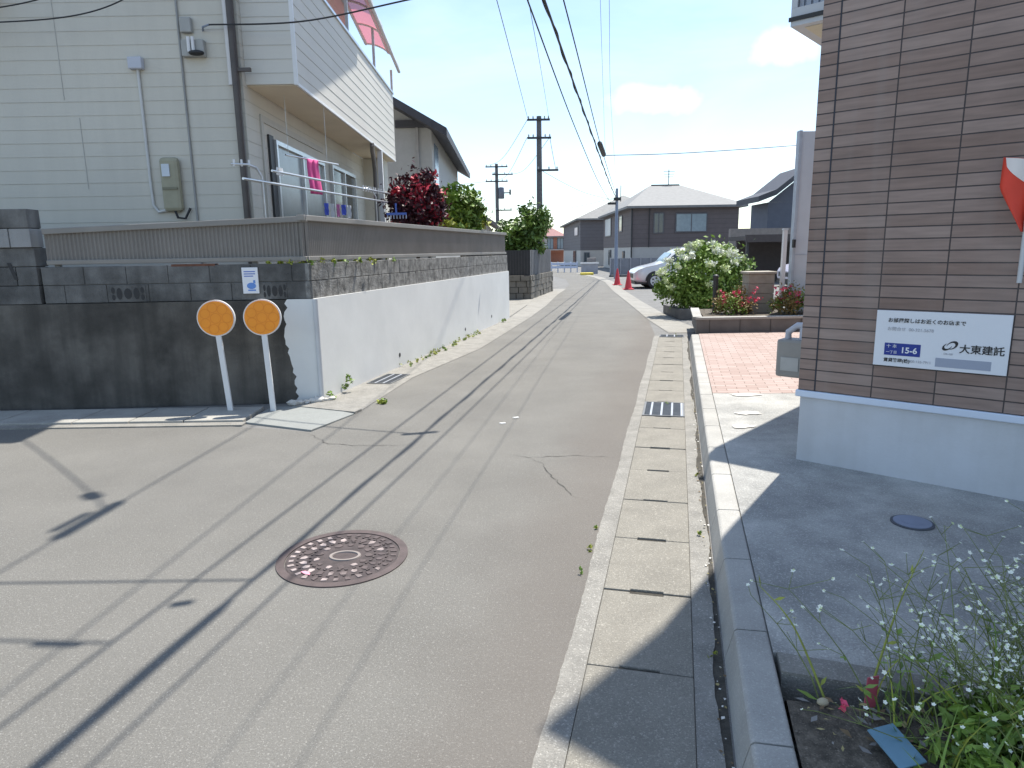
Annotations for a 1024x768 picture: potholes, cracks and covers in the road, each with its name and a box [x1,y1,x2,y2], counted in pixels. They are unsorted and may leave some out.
drain grate [367,374,410,384]
drain grate [642,401,685,418]
manhole cover [890,515,935,531]
manhole cover [275,530,408,588]
